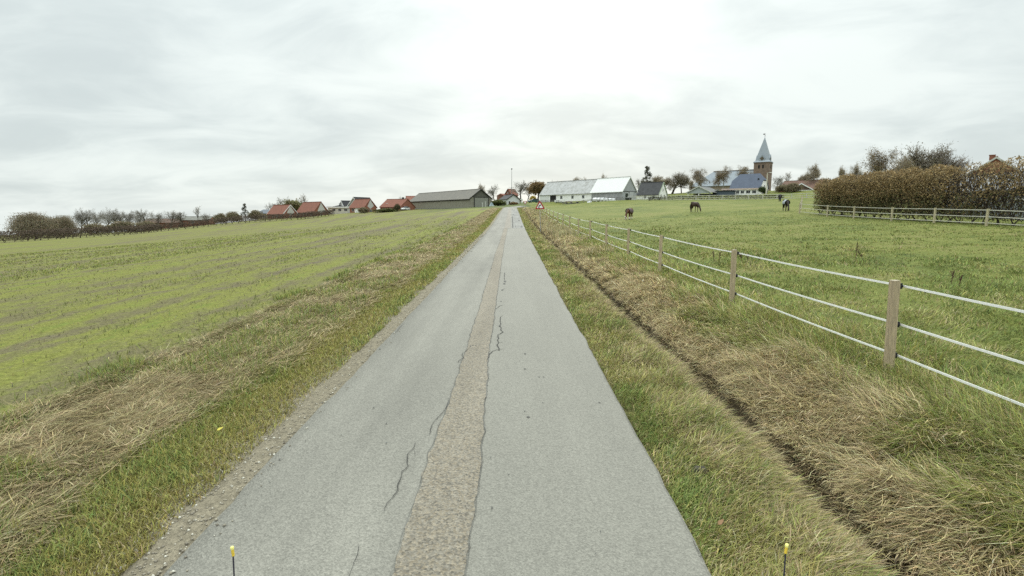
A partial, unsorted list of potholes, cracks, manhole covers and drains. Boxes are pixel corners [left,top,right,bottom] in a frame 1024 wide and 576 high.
crack [384,400,449,512]
